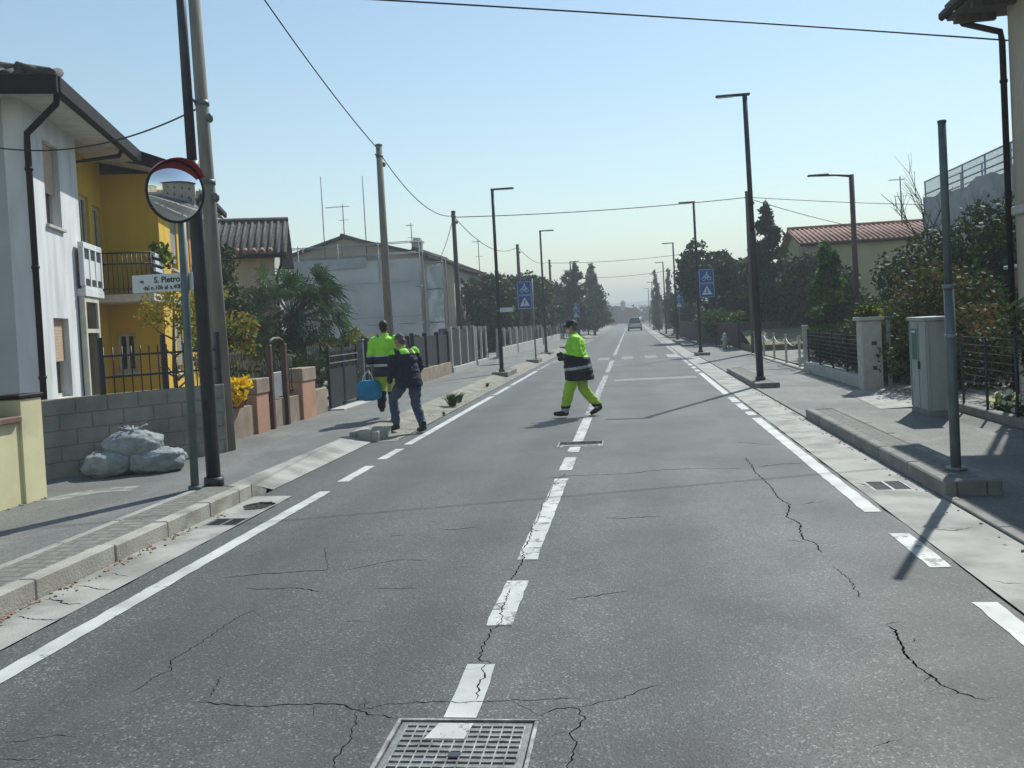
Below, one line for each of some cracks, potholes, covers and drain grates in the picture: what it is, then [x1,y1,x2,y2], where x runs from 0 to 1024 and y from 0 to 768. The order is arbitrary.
drain grate [863,481,913,502]
crack [198,442,860,768]
crack [128,608,259,694]
crack [19,573,125,623]
crack [885,622,998,701]
drain grate [203,518,250,536]
